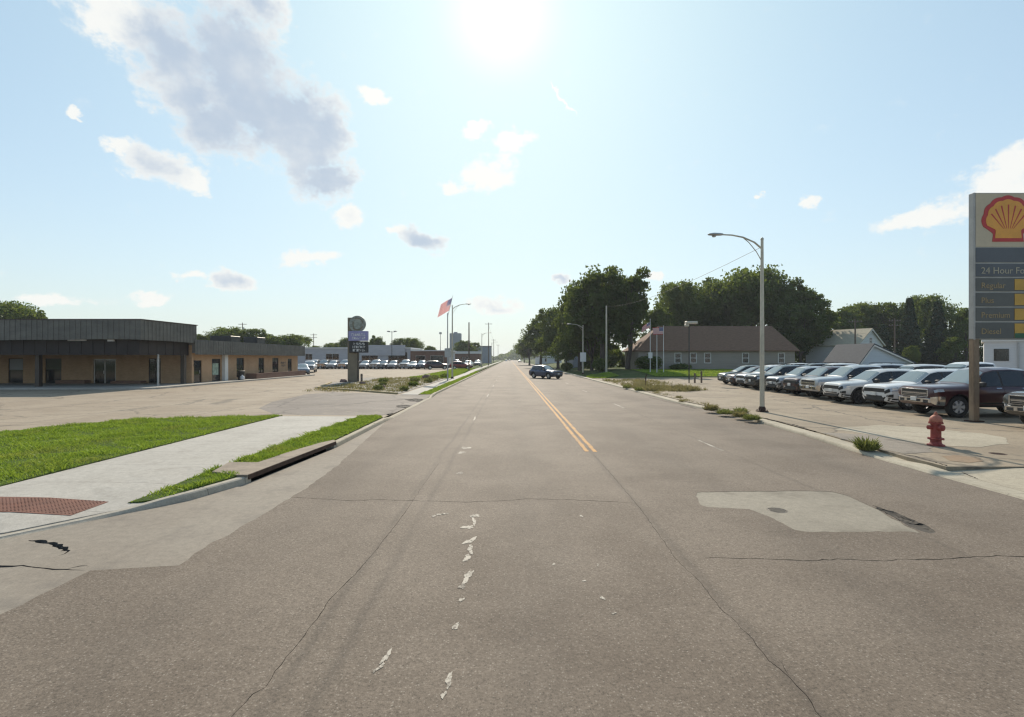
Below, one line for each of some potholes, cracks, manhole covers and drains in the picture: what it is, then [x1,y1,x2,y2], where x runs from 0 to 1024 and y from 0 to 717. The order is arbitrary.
drain grate [212,440,337,484]
pothole [873,505,935,533]
crack [29,540,70,555]
